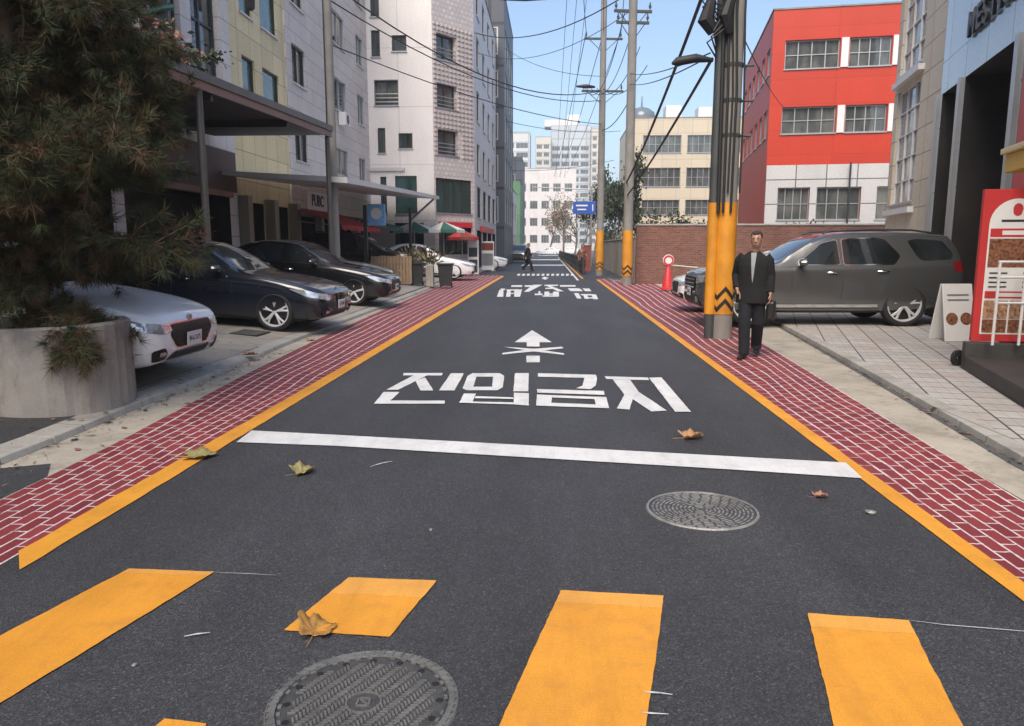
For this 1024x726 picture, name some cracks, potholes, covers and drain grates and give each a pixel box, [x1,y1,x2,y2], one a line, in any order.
manhole cover [263,650,460,726]
manhole cover [646,491,760,531]
